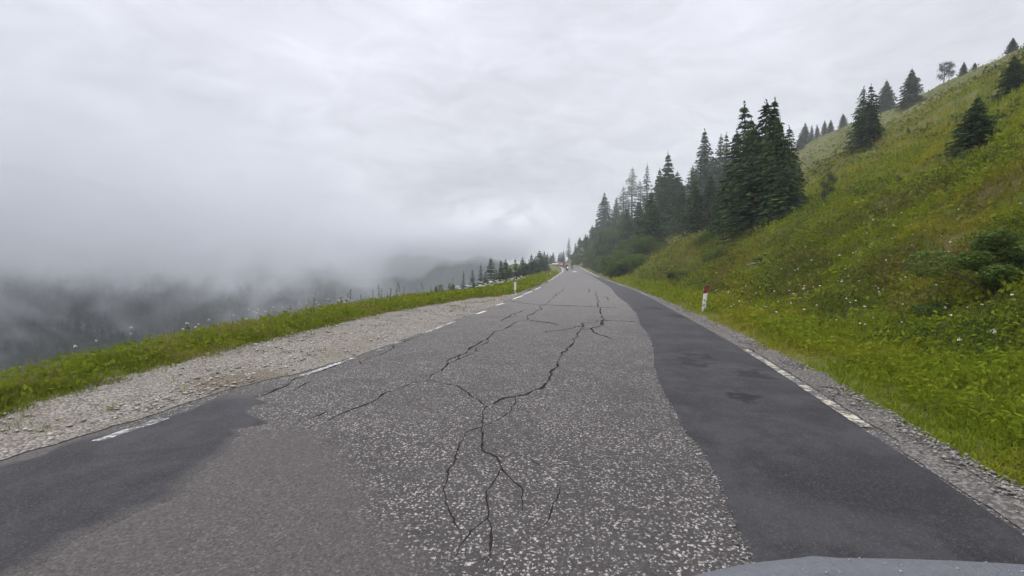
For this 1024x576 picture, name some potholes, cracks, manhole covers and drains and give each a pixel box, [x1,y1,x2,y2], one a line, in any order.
crack [289,288,634,575]
crack [255,335,422,398]
